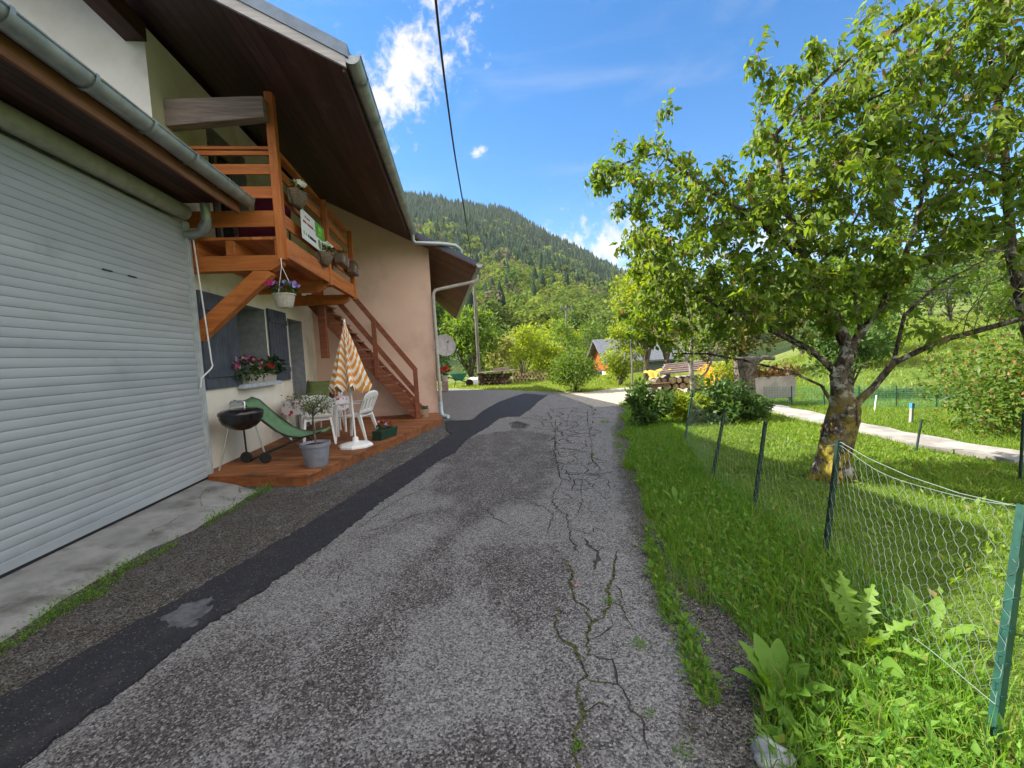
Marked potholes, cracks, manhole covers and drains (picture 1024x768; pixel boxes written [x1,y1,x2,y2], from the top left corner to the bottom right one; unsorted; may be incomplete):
crack [526,405,648,768]
pothole [509,421,530,429]
